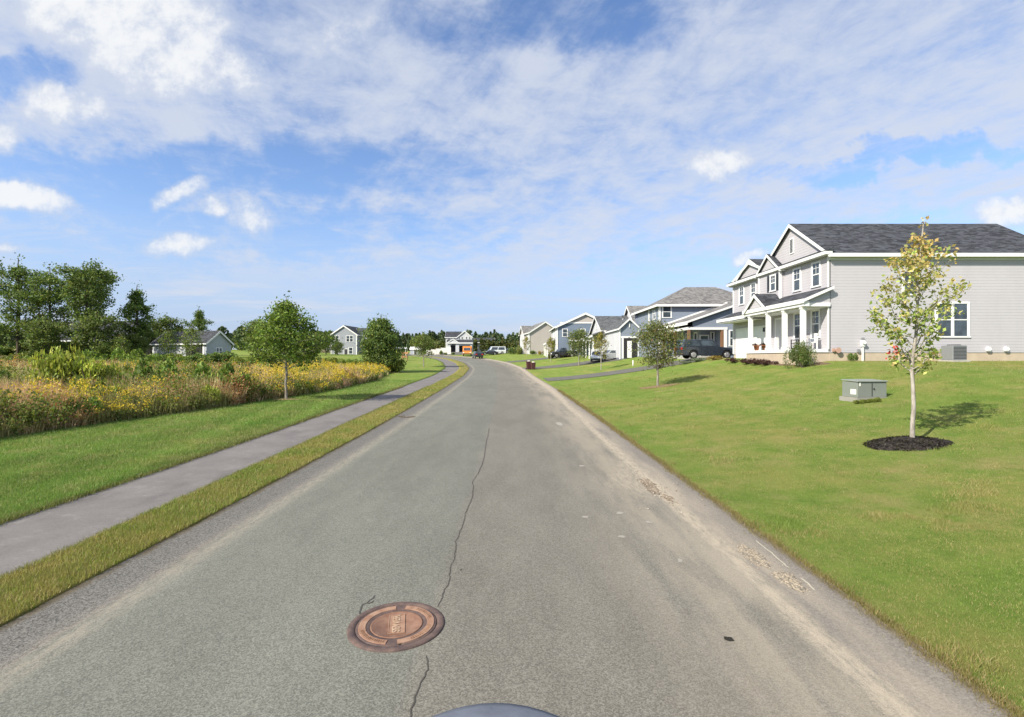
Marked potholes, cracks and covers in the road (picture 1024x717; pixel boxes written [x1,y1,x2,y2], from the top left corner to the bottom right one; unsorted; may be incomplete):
crack [437,430,489,607]
crack [410,656,429,717]
manhole cover [347,602,445,653]
